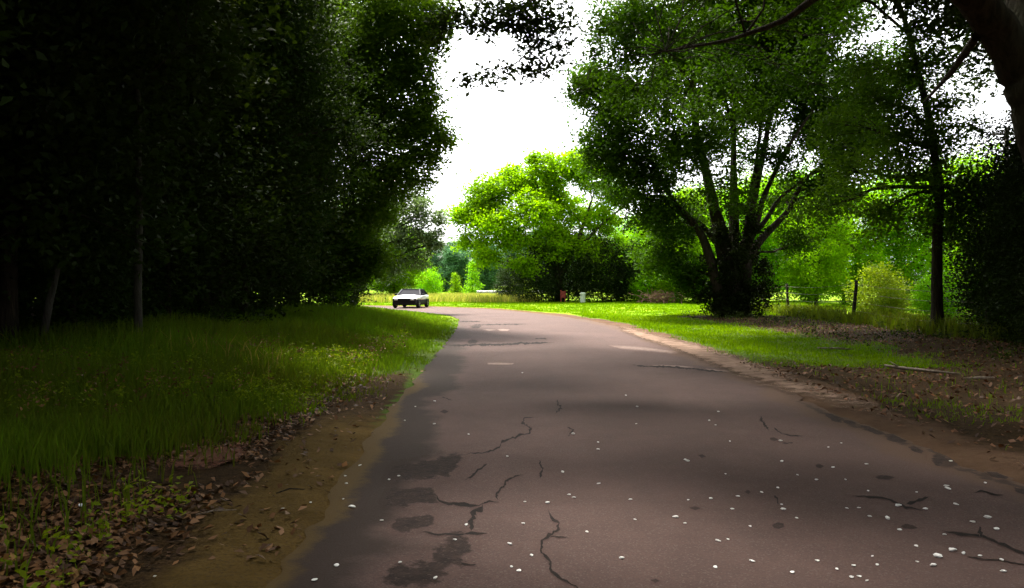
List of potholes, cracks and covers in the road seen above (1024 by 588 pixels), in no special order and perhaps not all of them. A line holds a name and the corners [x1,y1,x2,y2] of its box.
crack [852,495,930,511]
crack [941,527,1024,565]
crack [759,417,800,444]
crack [423,417,533,537]
crack [444,321,554,347]
crack [540,510,578,588]
